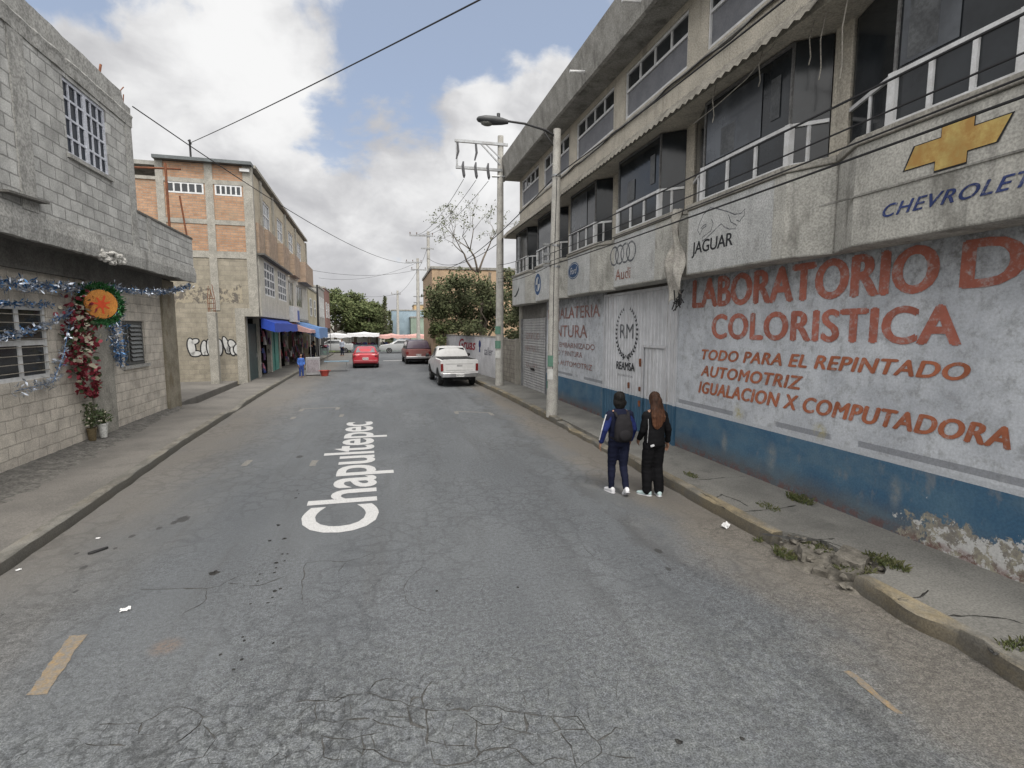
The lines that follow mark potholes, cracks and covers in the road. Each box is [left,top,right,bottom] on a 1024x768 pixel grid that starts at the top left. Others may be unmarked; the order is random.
crack [703,477,796,512]
crack [948,614,1020,623]
crack [11,651,635,768]
crack [140,572,284,613]
crack [301,553,372,601]
